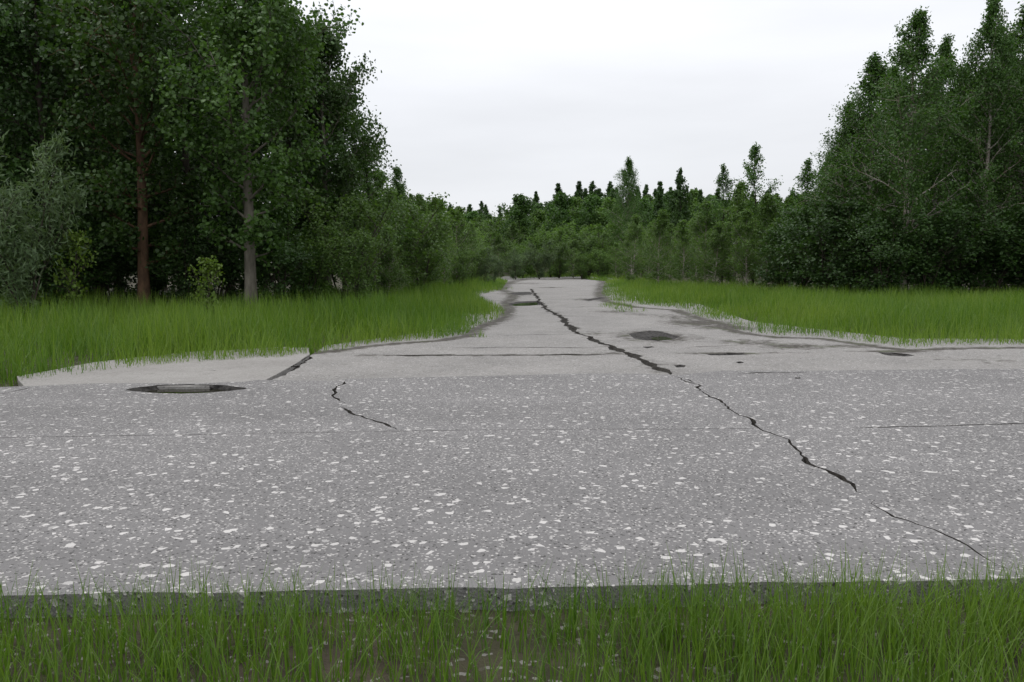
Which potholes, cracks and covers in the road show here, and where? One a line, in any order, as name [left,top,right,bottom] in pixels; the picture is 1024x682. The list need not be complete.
crack [675,376,1008,569]
crack [331,381,396,429]
pothole [629,330,680,341]
